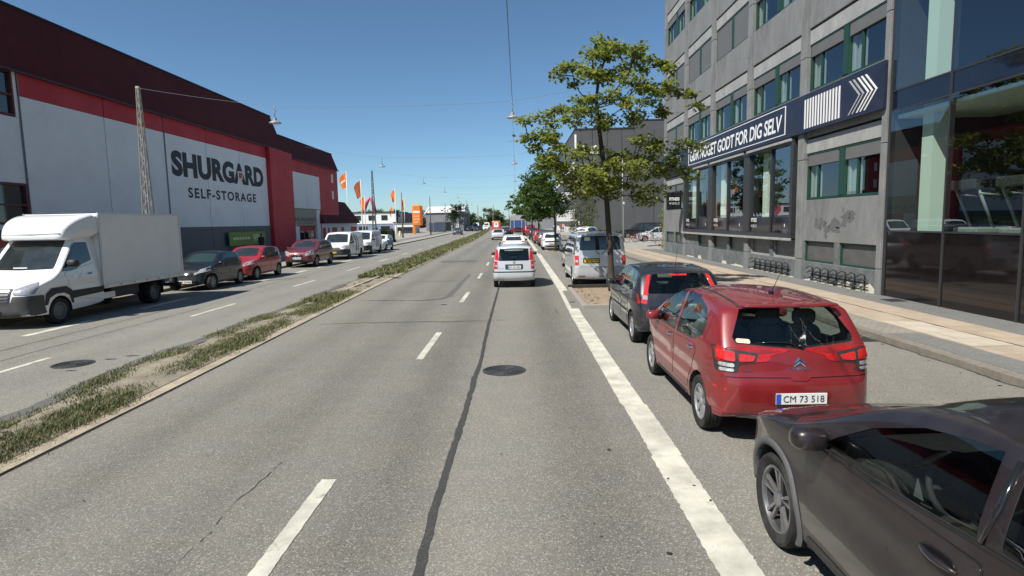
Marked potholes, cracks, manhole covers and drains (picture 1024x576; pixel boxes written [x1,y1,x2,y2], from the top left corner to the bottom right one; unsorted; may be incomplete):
manhole cover [483,365,526,376]
manhole cover [50,360,95,369]
